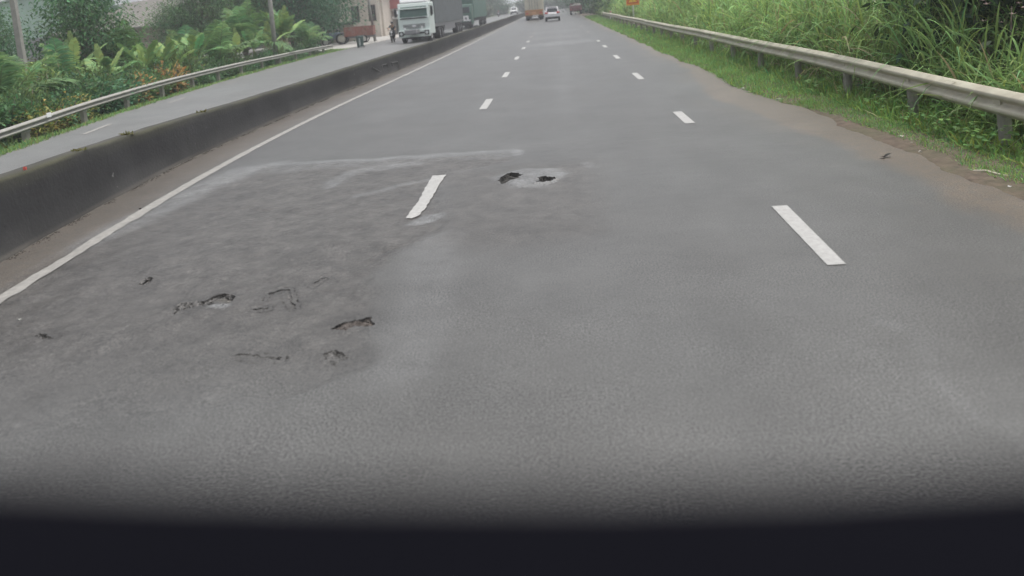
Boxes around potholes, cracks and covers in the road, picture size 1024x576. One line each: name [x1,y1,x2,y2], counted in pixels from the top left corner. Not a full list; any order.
crack [230,351,287,364]
pothole [132,275,158,289]
crack [248,276,332,313]
pothole [322,313,383,335]
pothole [312,346,357,372]
pothole [493,172,527,186]
pothole [532,176,560,185]
pothole [162,291,243,318]
pothole [26,331,61,343]
